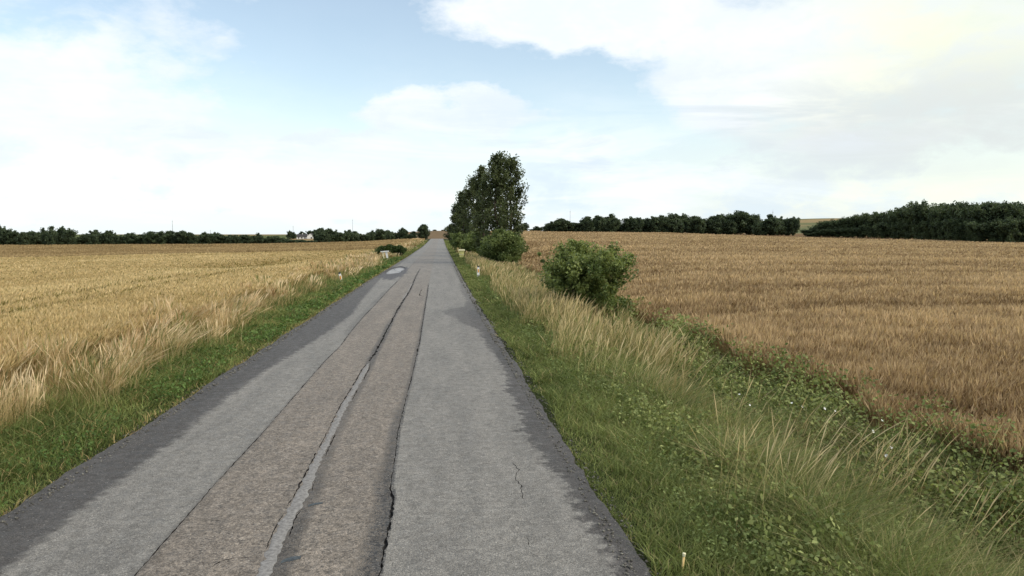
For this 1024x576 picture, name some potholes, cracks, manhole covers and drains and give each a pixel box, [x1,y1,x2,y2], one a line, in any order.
crack [134,271,422,576]
